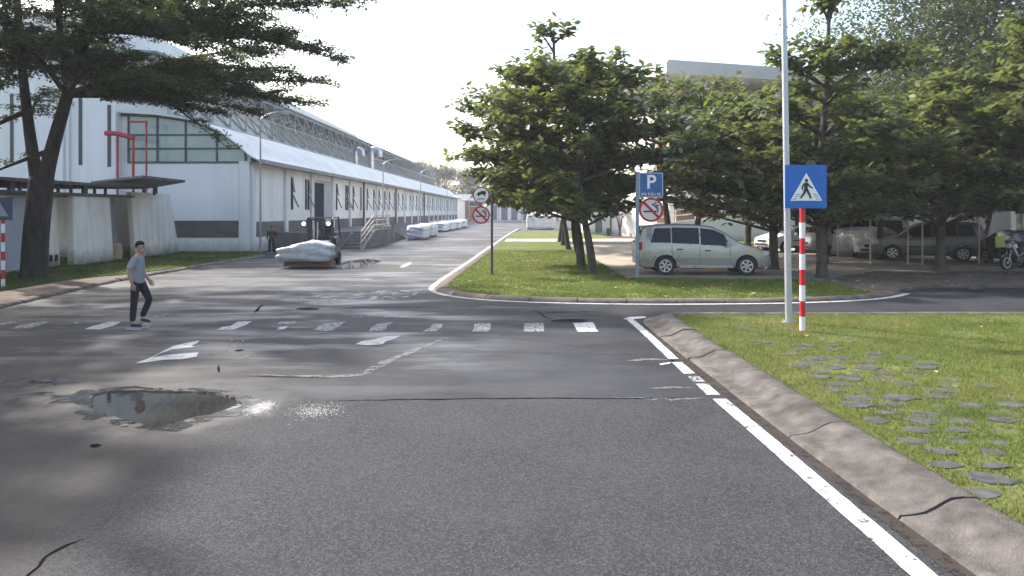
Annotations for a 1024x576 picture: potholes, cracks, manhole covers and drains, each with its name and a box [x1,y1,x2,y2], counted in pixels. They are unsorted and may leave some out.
crack [26,537,87,576]
pothole [340,259,382,268]
pothole [90,390,243,427]
